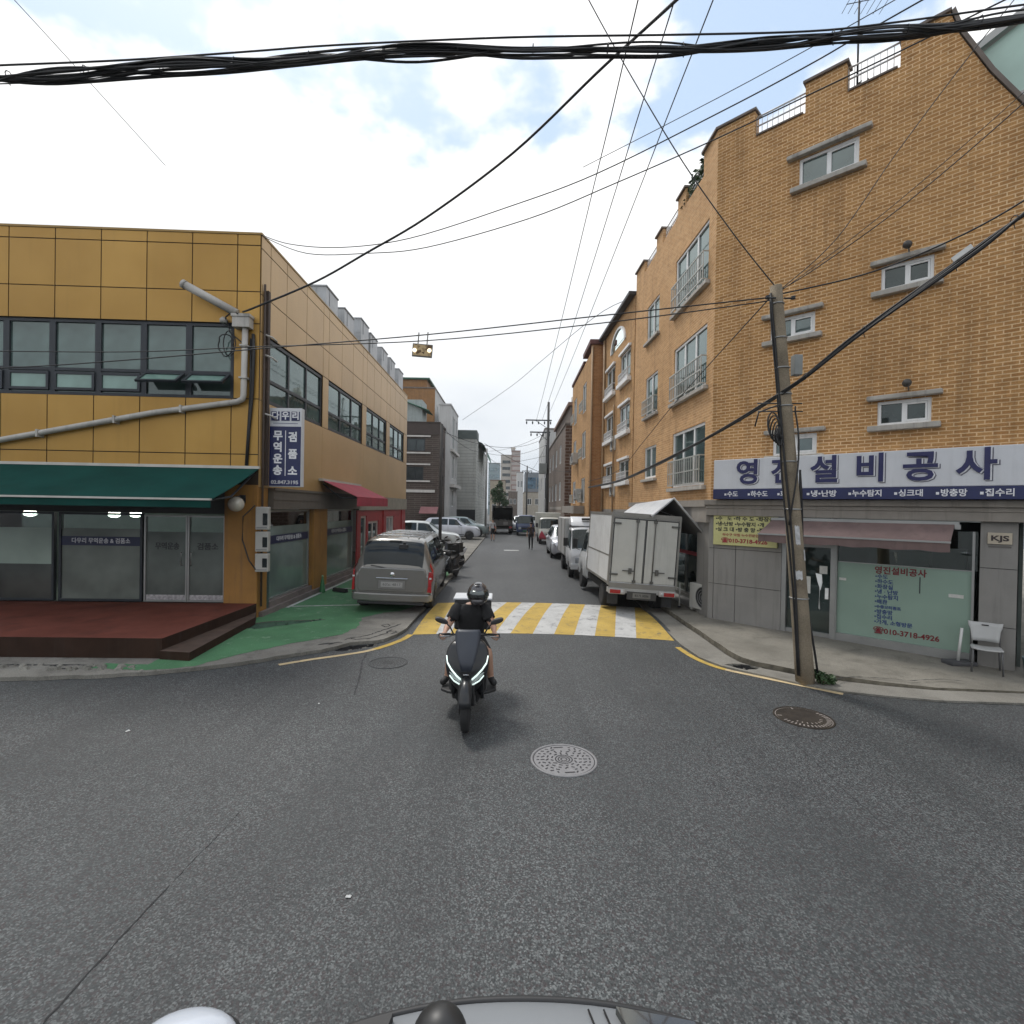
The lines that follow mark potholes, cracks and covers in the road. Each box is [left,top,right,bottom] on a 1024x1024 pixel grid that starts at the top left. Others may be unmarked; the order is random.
manhole cover [530,744,598,777]
manhole cover [368,657,408,669]
manhole cover [772,706,836,730]
